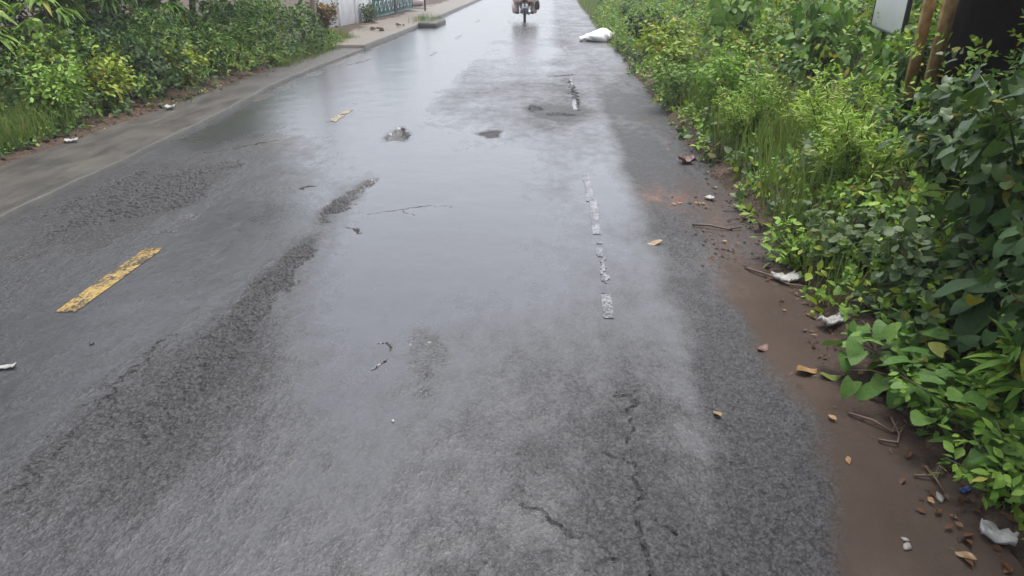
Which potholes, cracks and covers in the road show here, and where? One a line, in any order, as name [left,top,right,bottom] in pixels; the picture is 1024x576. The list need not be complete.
pothole [374,123,419,146]
pothole [522,104,549,113]
pothole [469,128,506,141]
crack [511,384,690,576]
